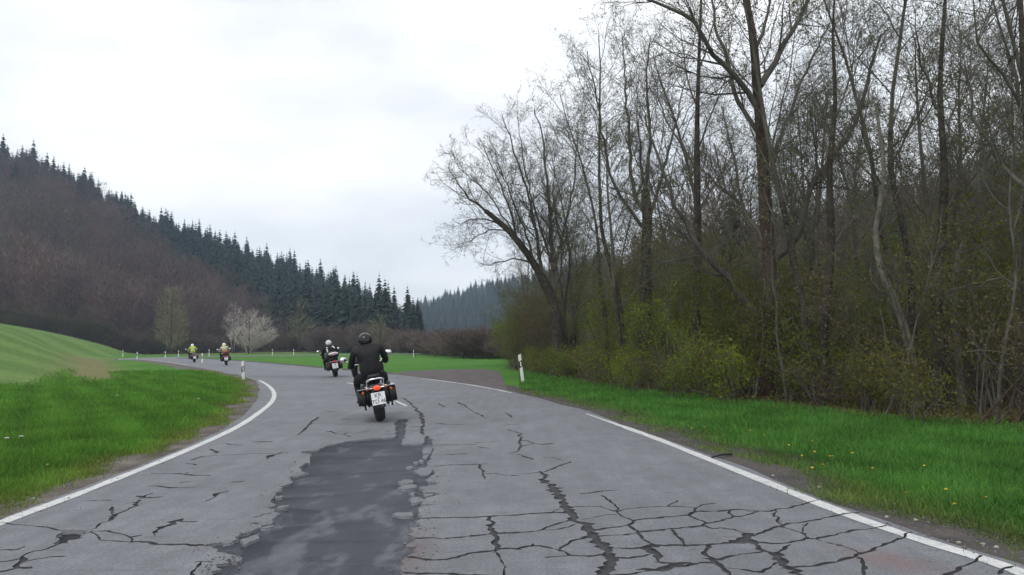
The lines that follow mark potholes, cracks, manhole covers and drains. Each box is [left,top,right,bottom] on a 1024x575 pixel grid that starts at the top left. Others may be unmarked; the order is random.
crack [0,441,289,575]
crack [404,413,1014,575]
crack [398,397,485,435]
